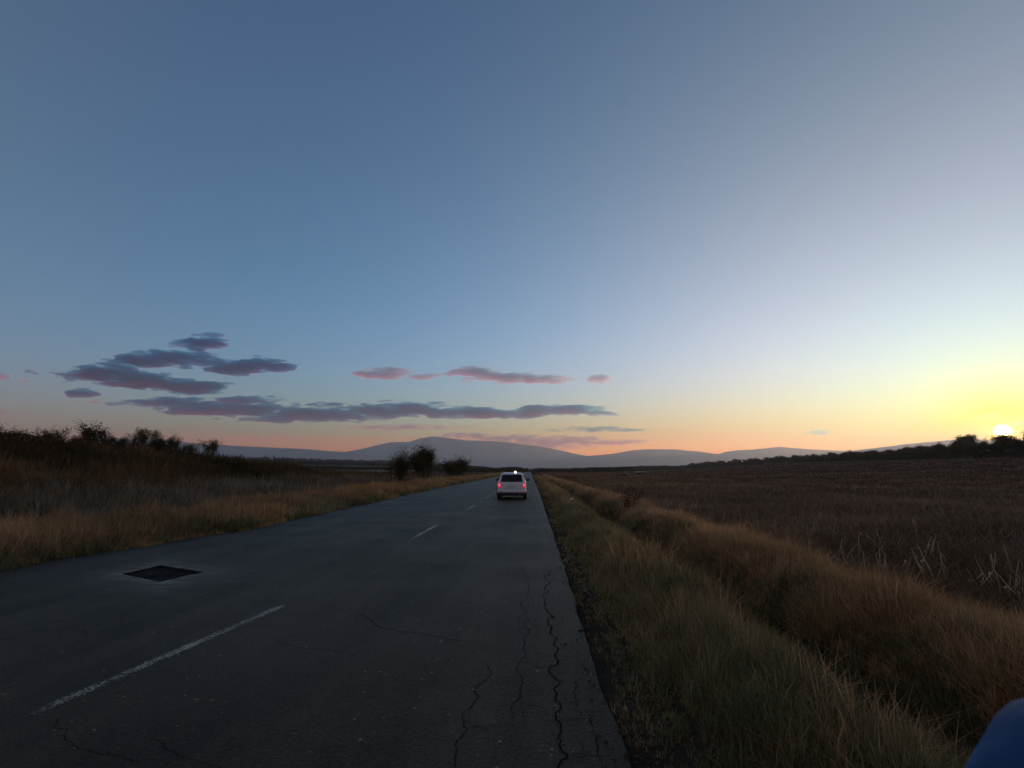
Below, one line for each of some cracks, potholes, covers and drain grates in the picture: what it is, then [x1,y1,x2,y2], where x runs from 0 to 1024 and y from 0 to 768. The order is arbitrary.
pothole [123,565,203,582]
crack [273,572,618,768]
crack [53,718,221,768]
